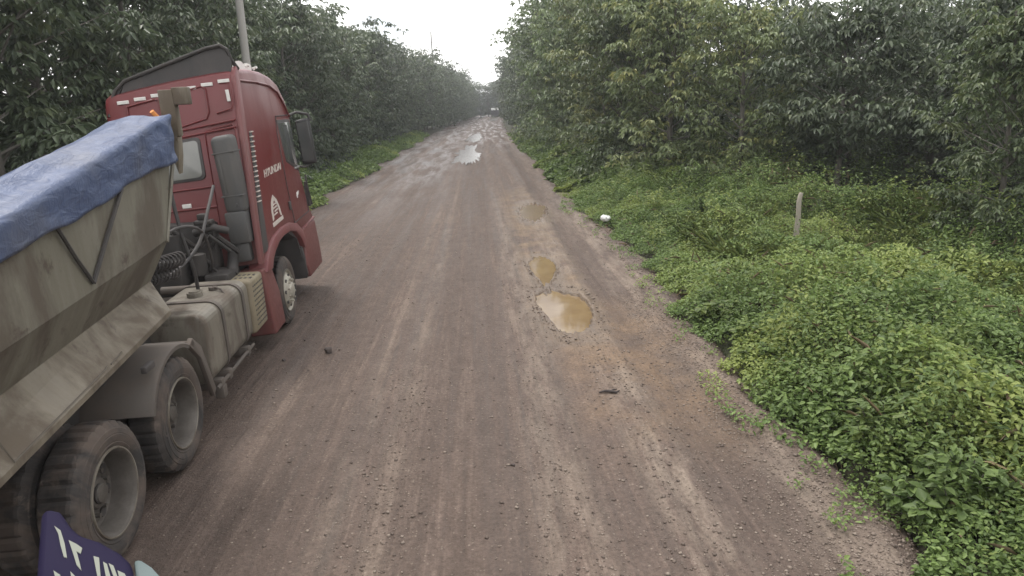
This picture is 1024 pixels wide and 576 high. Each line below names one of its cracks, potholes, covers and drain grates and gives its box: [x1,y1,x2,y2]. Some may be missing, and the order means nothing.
pothole [526,252,560,296]
pothole [517,201,549,223]
pothole [464,133,483,143]
pothole [529,283,601,340]
pothole [449,144,483,166]
